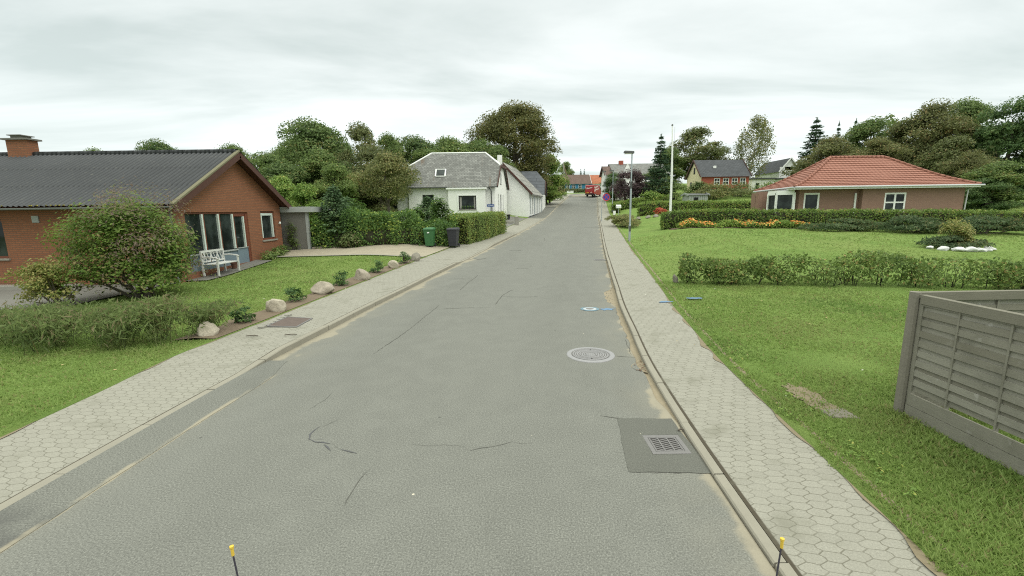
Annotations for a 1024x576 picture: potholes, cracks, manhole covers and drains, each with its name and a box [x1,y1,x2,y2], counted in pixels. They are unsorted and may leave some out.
utility cover [258,314,313,329]
manhole cover [567,347,615,363]
drain grate [642,435,692,454]
